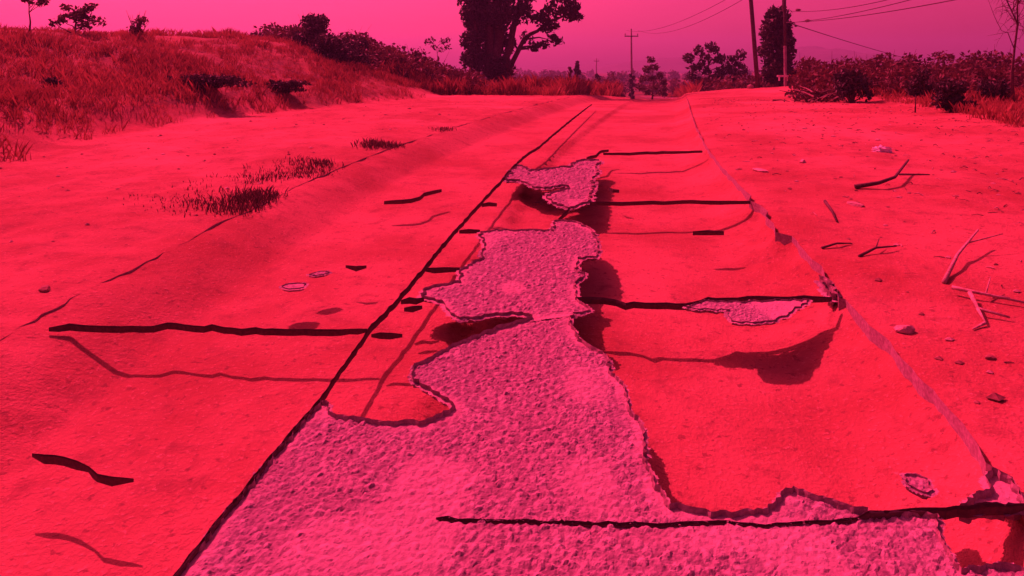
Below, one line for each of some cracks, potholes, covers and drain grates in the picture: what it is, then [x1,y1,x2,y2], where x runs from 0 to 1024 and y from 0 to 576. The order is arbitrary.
pothole [174,313,1024,576]
pothole [416,219,603,323]
crack [586,149,702,159]
crack [384,189,442,204]
pothole [503,158,605,212]
crack [575,295,832,310]
crack [49,322,402,340]
pothole [682,298,813,327]
